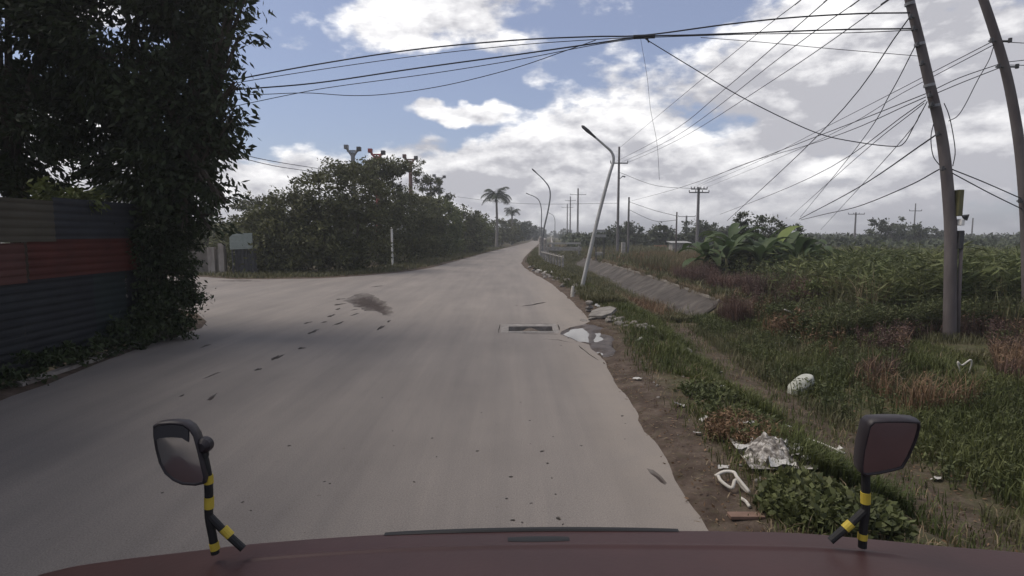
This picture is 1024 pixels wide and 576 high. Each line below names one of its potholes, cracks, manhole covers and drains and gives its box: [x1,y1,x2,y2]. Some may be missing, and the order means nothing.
pothole [561,324,616,357]
